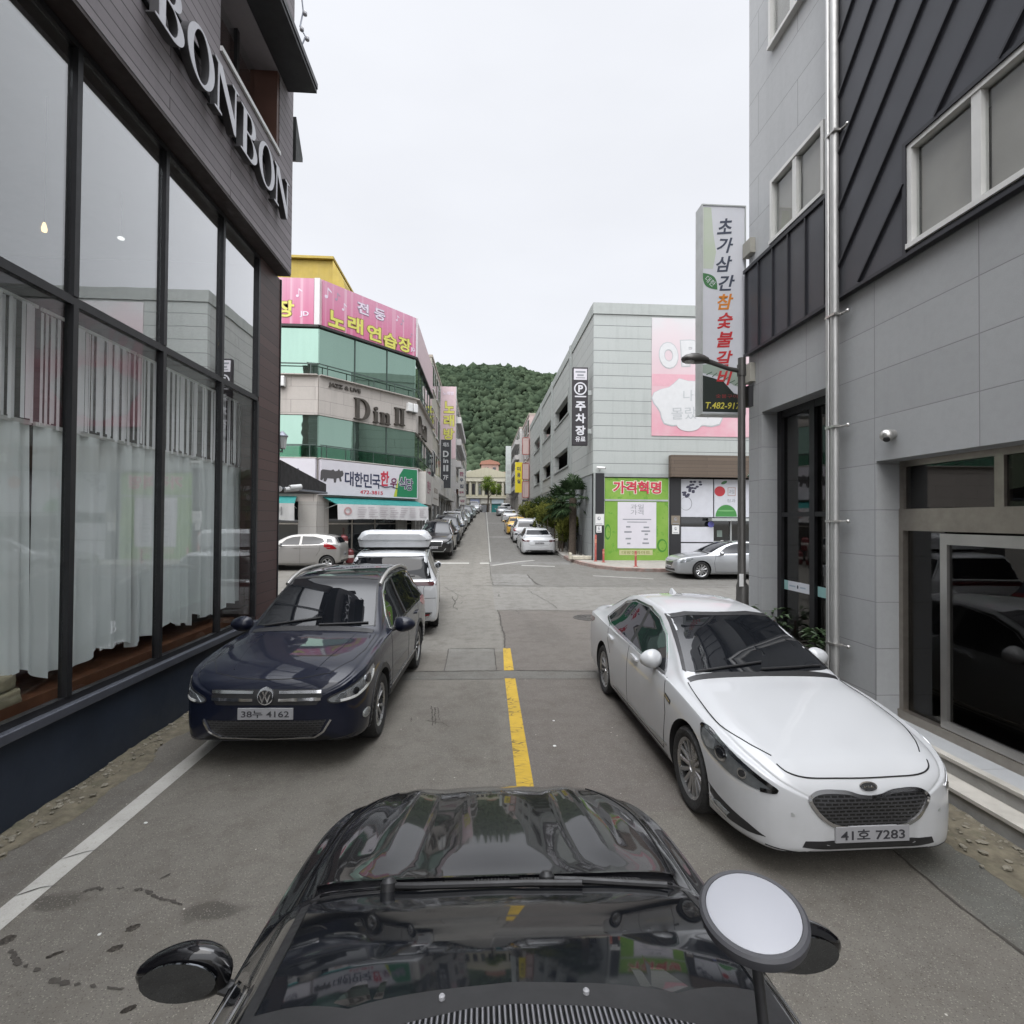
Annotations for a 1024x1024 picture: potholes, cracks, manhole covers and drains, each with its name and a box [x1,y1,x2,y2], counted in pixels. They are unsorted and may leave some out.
crack [410,706,447,726]
